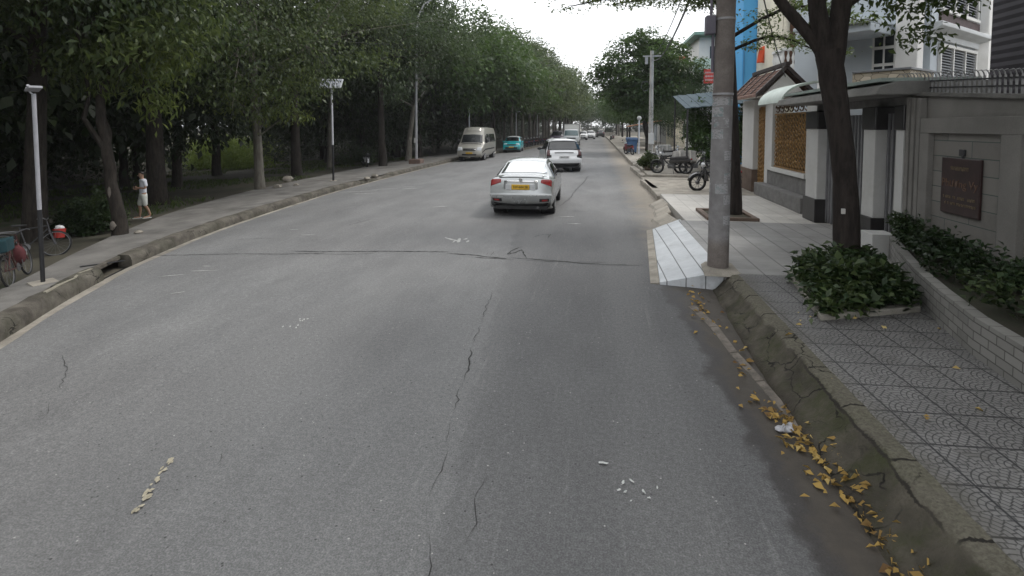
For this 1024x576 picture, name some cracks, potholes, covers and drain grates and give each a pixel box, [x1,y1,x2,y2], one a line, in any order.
crack [426,295,492,576]
